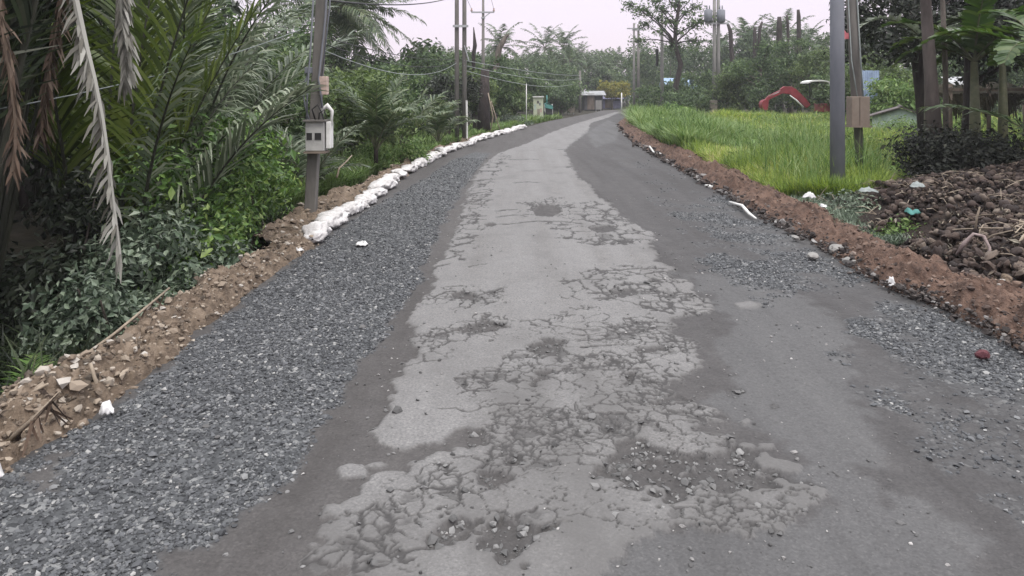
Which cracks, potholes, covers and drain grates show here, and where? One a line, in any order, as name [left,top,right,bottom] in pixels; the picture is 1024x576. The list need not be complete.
crack [667,480,827,541]
pothole [533,204,562,217]
crack [298,155,736,576]
pothole [588,437,790,504]
pothole [454,513,570,565]
